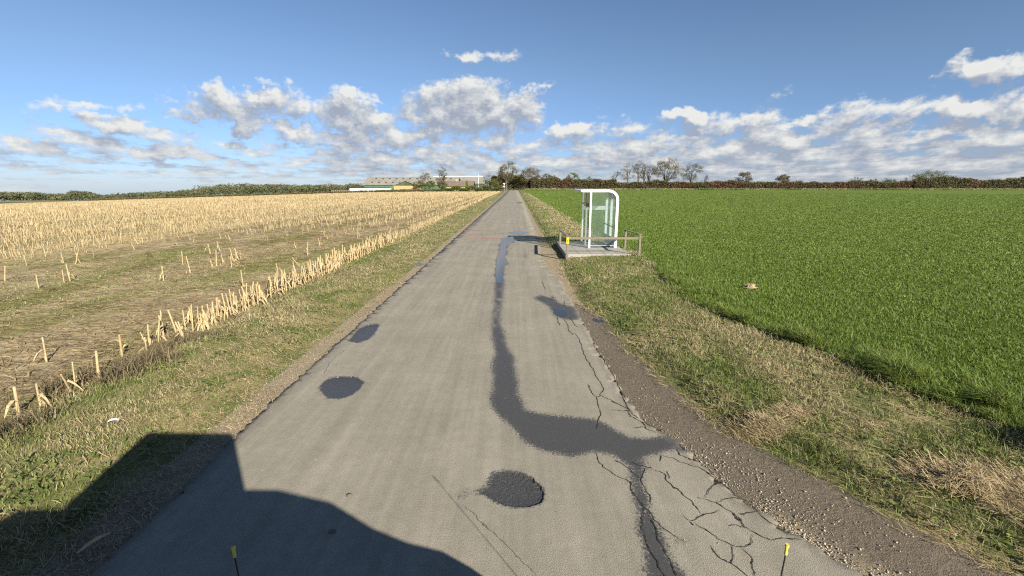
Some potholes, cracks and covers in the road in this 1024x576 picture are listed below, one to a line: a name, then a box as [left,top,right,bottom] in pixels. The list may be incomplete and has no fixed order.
crack [597,448,801,576]
crack [557,317,665,432]
pothole [479,470,544,507]
